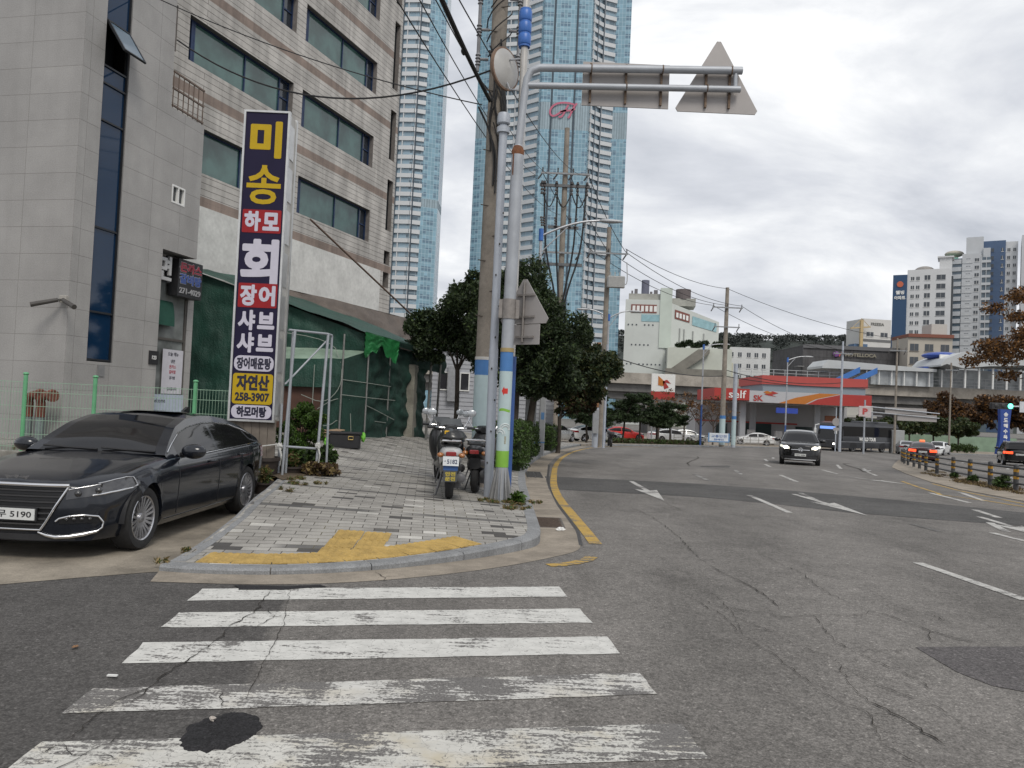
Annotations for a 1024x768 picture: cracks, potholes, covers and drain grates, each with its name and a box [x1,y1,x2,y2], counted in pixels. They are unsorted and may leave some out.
crack [19,590,288,768]
manhole cover [537,517,565,528]
crack [649,504,973,764]
